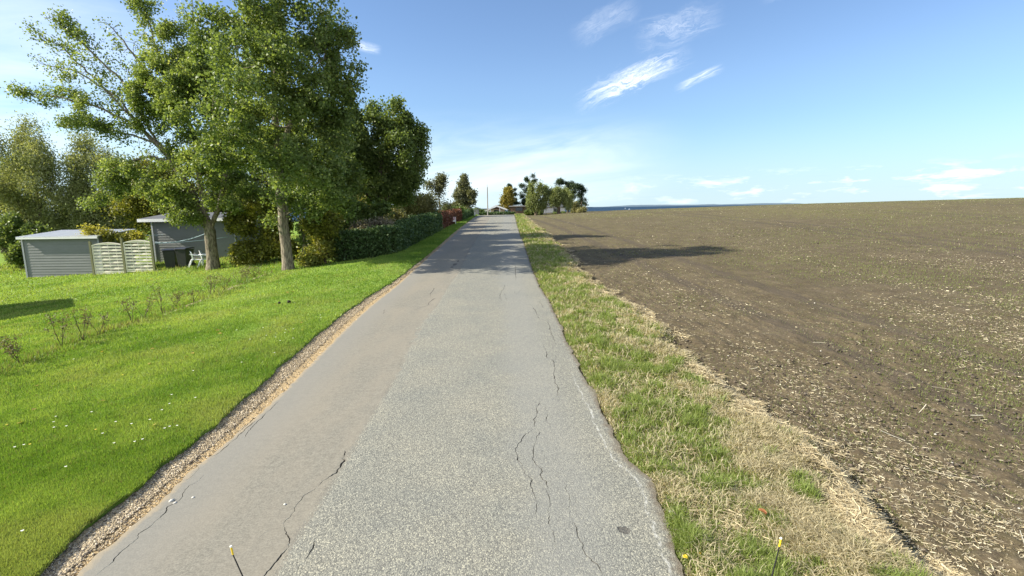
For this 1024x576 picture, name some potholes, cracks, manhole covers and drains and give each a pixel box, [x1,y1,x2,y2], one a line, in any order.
crack [95,472,201,576]
crack [261,450,346,576]
crack [515,304,605,576]
